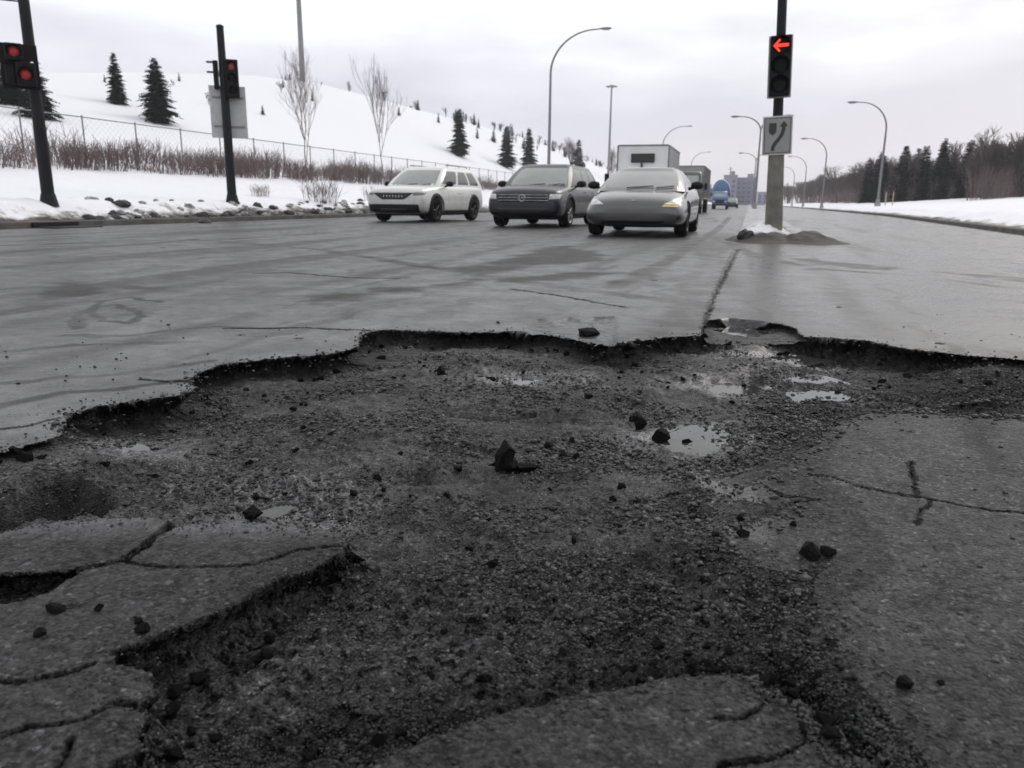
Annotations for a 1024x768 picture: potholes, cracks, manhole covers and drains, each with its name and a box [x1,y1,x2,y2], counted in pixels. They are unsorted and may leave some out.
crack [0,661,148,768]
pothole [699,319,814,346]
crack [710,699,807,768]
crack [75,520,344,573]
crack [508,289,630,308]
crack [761,461,1024,526]
pothole [0,329,1024,768]
